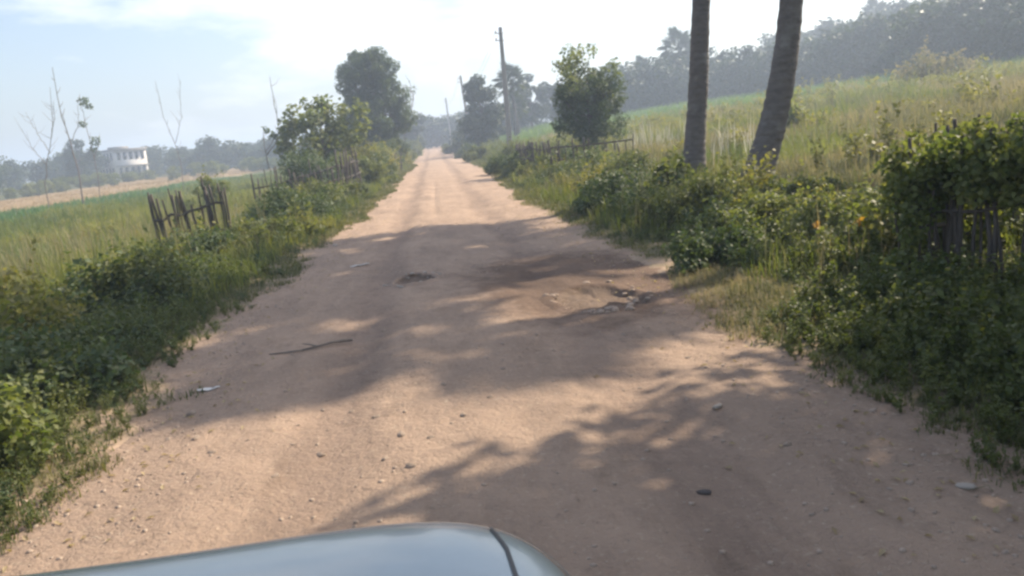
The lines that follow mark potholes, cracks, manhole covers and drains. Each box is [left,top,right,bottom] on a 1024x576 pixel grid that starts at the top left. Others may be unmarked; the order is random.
pothole [382,271,443,288]
pothole [540,280,672,314]
